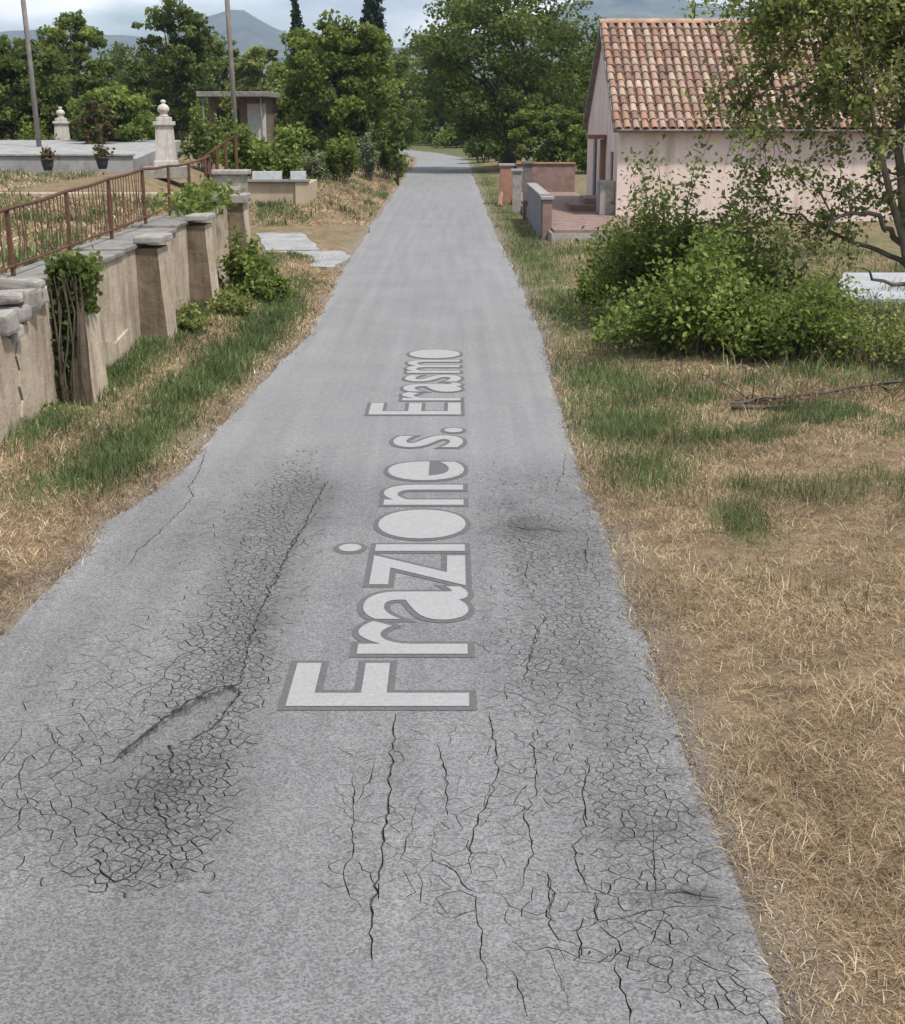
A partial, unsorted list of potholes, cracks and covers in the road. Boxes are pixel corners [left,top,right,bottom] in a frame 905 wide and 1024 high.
crack [324,454,769,1024]
crack [0,448,349,898]
